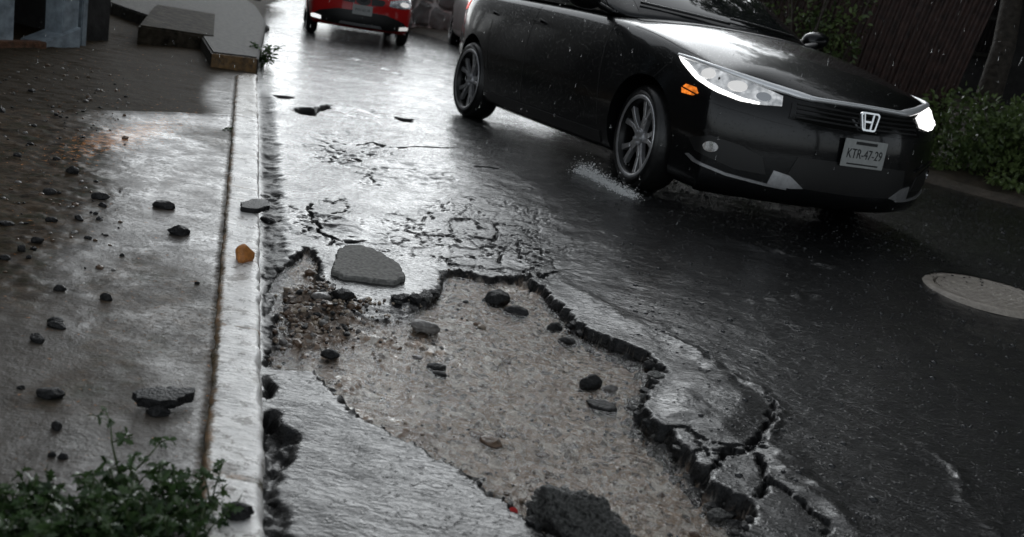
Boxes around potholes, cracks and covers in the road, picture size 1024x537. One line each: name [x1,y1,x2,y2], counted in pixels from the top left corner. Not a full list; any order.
crack [670,385,854,537]
pothole [259,241,778,537]
crack [277,136,515,249]
manhole cover [922,272,1024,319]
crack [403,206,569,284]
